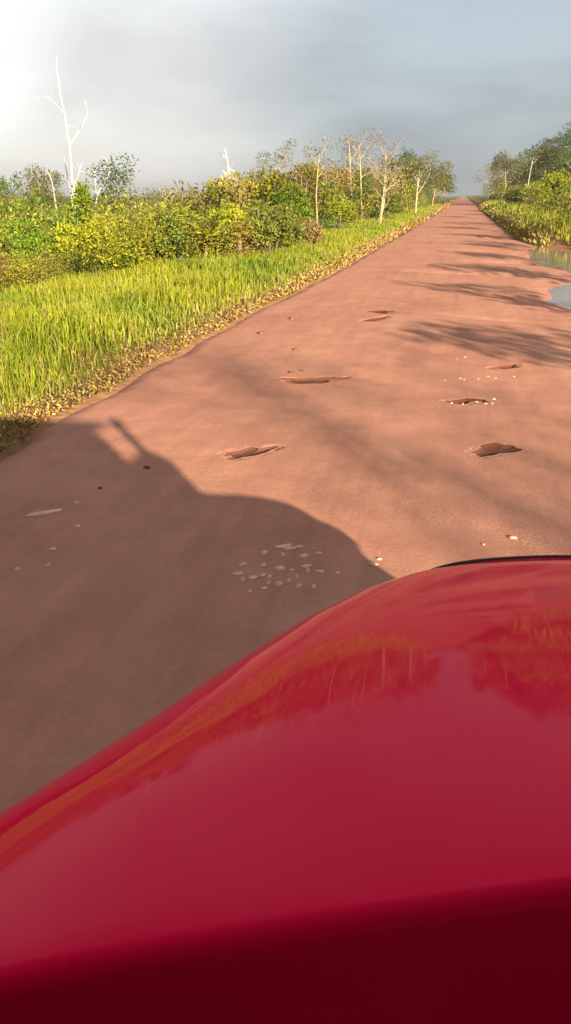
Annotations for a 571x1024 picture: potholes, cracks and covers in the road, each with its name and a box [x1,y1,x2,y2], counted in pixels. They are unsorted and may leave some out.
pothole [218,445,283,462]
pothole [439,397,493,405]
pothole [466,441,529,459]
pothole [275,376,354,385]
